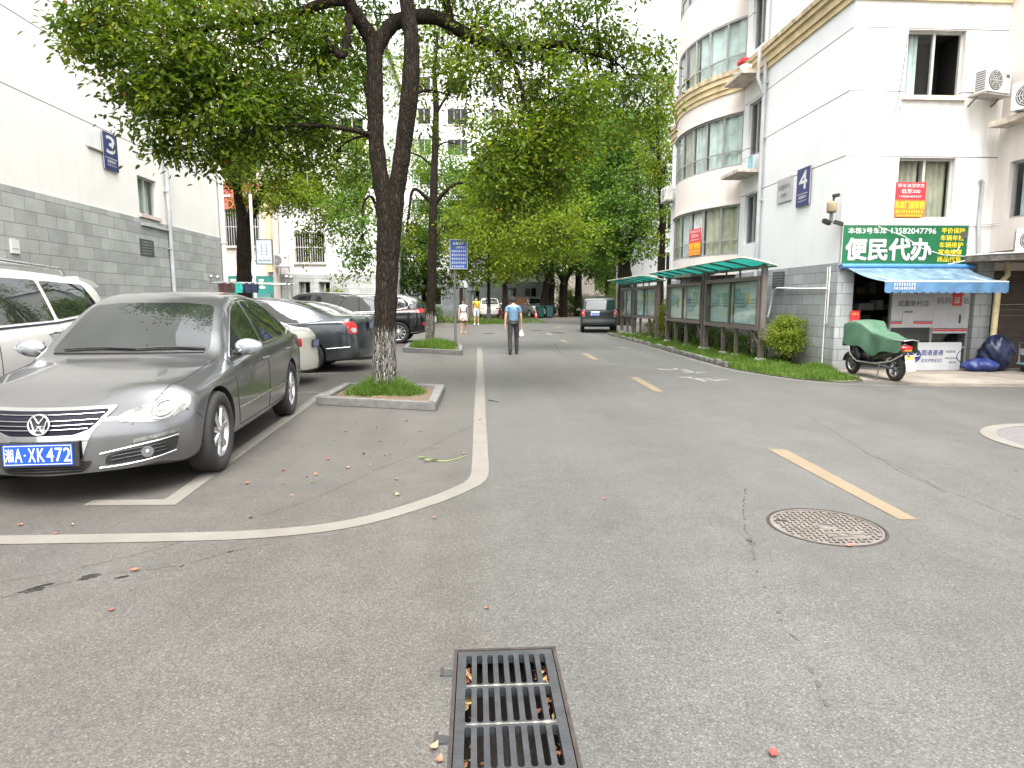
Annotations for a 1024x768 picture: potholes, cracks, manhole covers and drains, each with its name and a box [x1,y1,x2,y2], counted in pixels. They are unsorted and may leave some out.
manhole cover [766,508,889,547]
crack [742,488,830,708]
drain grate [434,646,583,768]
crack [810,417,1024,521]
